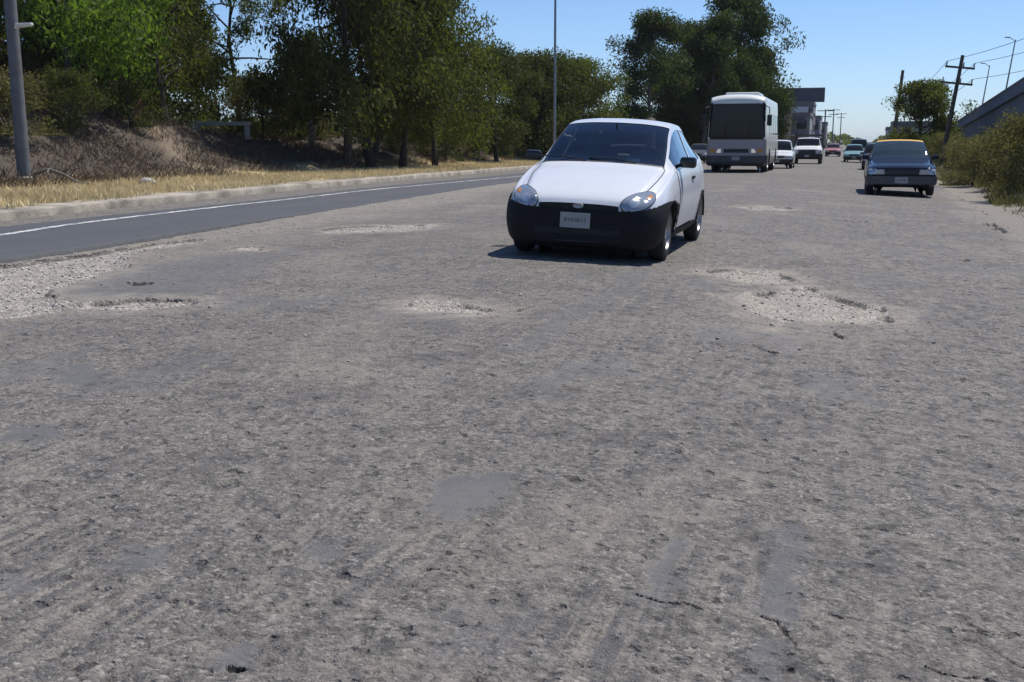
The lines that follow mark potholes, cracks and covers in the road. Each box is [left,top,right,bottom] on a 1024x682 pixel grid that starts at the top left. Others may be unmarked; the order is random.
crack [636,593,702,610]
pothole [705,268,797,284]
pothole [734,285,895,326]
pothole [320,224,438,234]
pothole [405,300,501,315]
crack [924,665,992,682]
crack [760,615,802,651]
